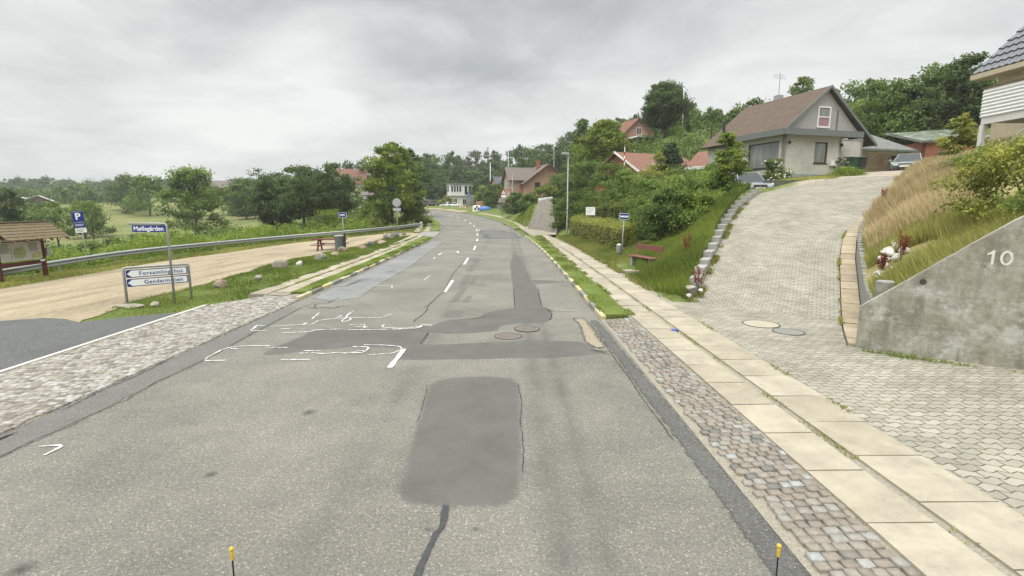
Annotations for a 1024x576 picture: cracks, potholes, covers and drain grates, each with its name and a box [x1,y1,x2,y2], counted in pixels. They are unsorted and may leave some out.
manhole cover [494,332,522,340]
manhole cover [742,320,781,328]
manhole cover [772,328,805,336]
